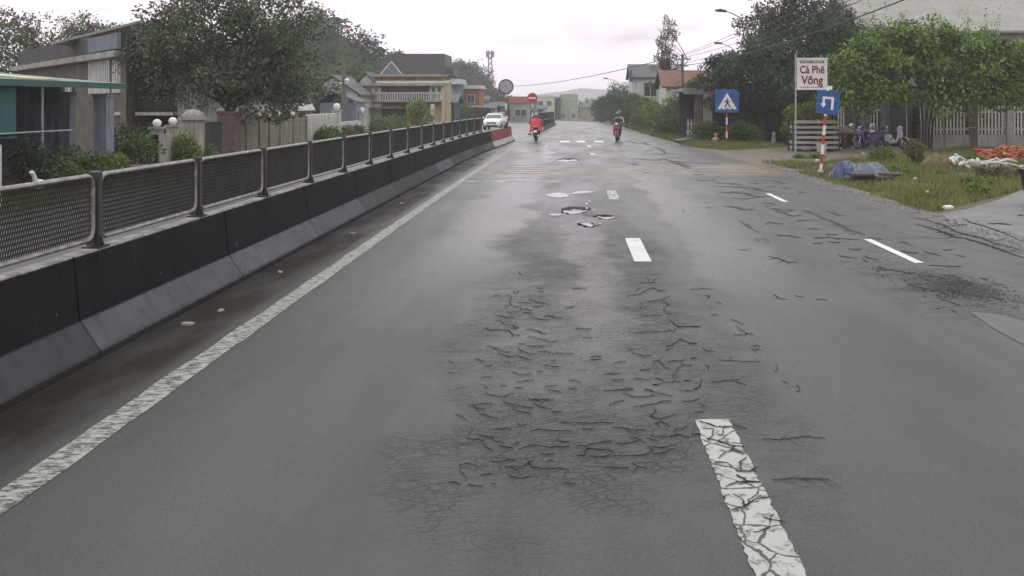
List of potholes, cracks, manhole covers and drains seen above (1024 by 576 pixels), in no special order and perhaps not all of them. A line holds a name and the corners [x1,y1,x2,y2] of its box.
crack [628,141,1024,312]
crack [448,271,801,487]
crack [773,477,842,488]
crack [733,424,821,445]
